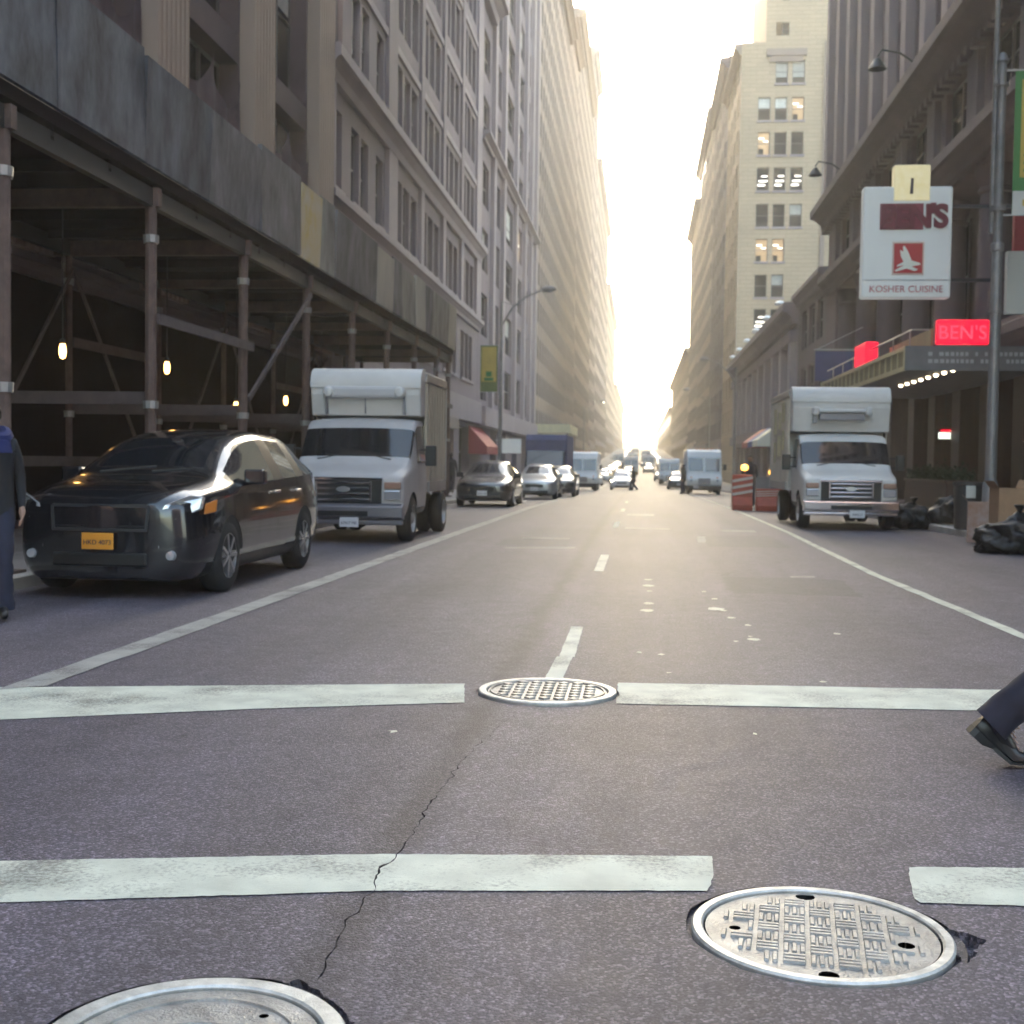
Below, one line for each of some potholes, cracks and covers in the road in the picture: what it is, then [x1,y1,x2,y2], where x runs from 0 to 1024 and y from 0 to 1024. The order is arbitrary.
manhole cover [49,978,349,1024]
crack [318,714,514,979]
pothole [938,929,987,963]
manhole cover [686,886,970,989]
